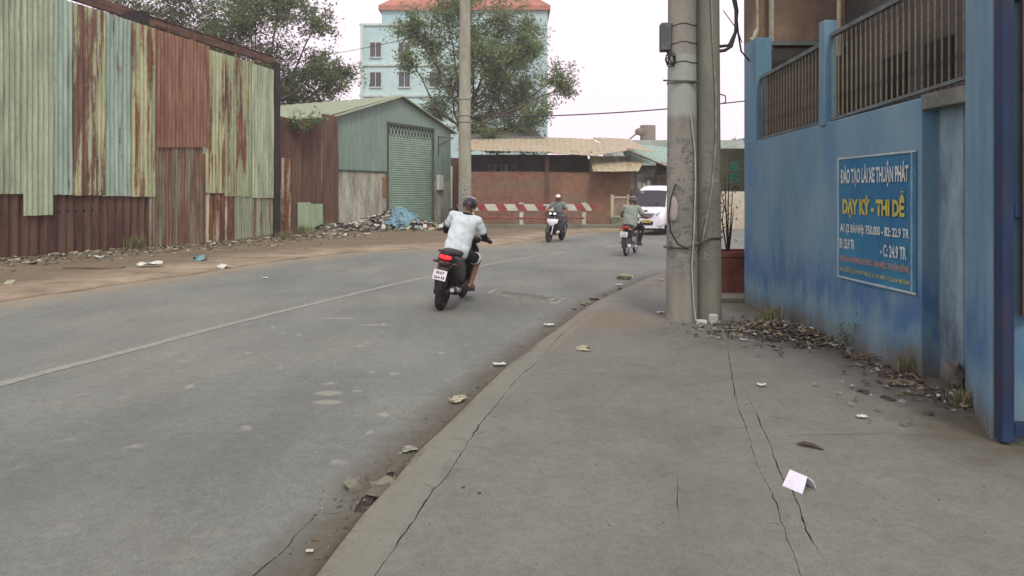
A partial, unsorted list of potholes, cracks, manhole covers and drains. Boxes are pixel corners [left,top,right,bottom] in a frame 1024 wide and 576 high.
manhole cover [485,289,566,304]
crack [253,510,346,576]
